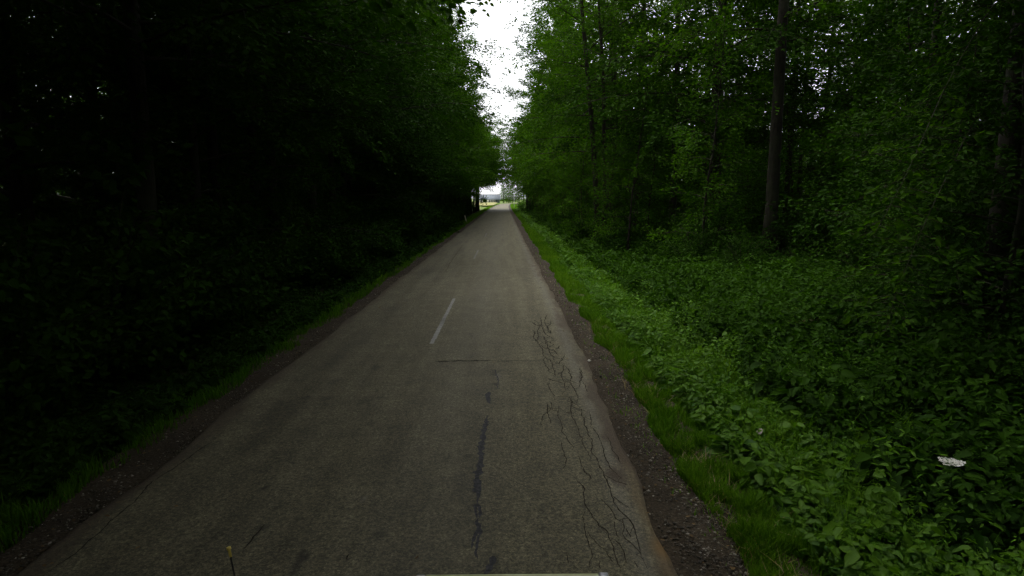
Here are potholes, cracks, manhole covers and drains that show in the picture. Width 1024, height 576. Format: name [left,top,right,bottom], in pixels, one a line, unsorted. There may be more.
crack [528,316,648,571]
